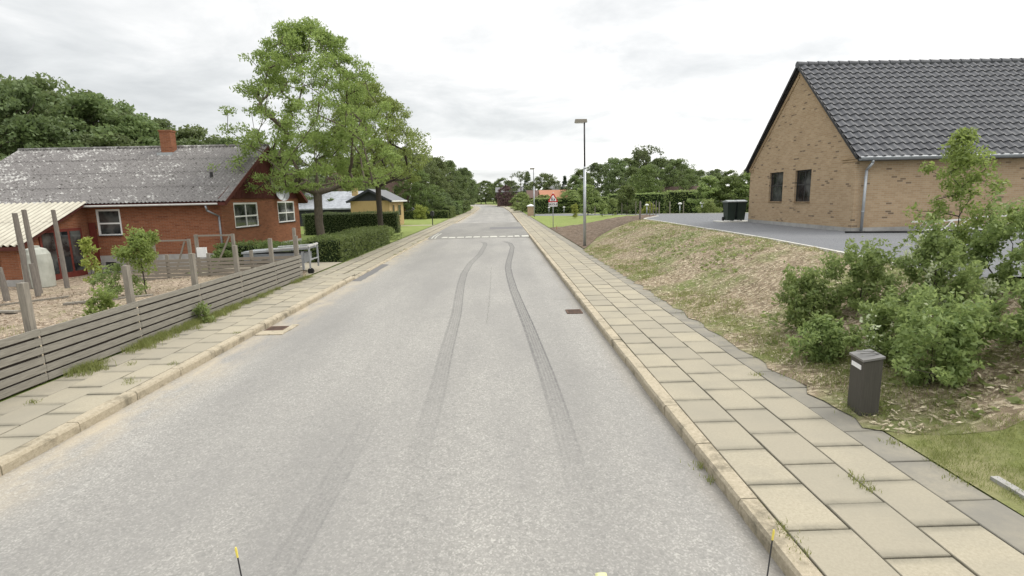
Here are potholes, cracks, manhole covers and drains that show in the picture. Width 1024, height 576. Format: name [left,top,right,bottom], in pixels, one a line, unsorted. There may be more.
drain grate [254,324,299,336]
